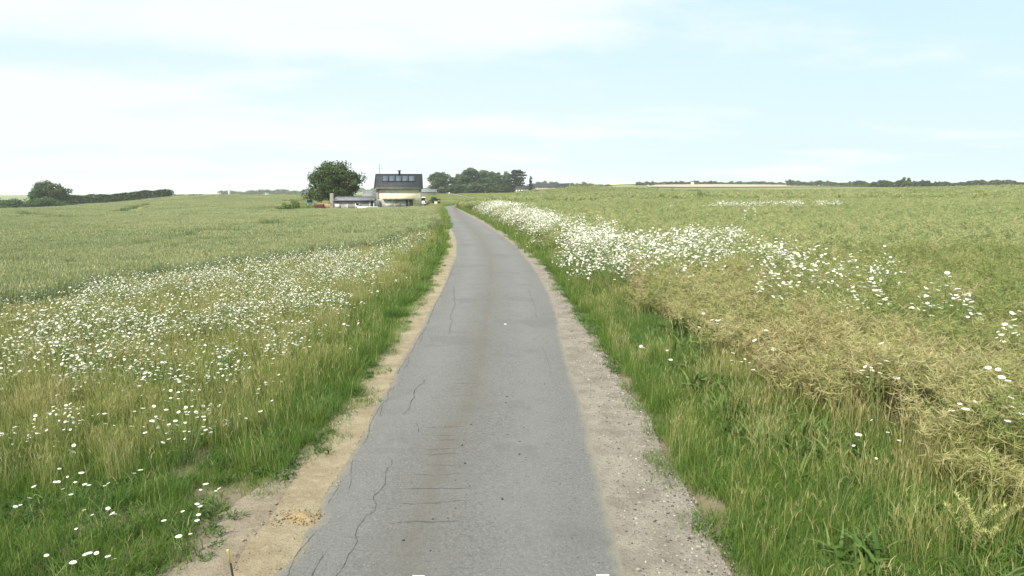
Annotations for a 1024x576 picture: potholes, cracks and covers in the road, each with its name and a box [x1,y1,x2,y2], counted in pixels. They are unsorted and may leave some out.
crack [287,457,392,576]
crack [399,271,456,431]
